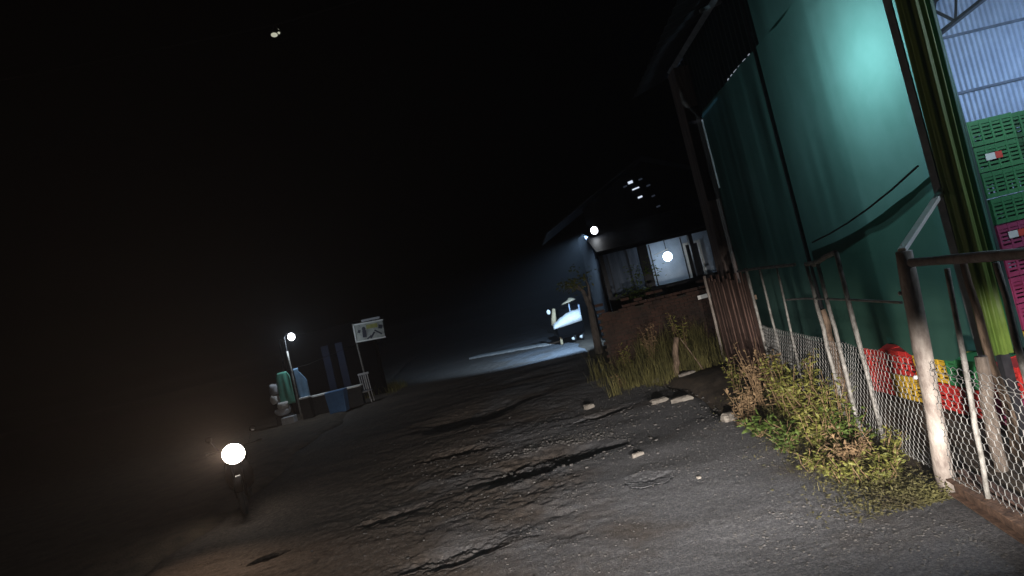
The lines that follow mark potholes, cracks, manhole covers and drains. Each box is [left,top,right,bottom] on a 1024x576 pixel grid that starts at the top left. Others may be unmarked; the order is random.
pothole [623,471,675,489]
pothole [247,550,291,566]
